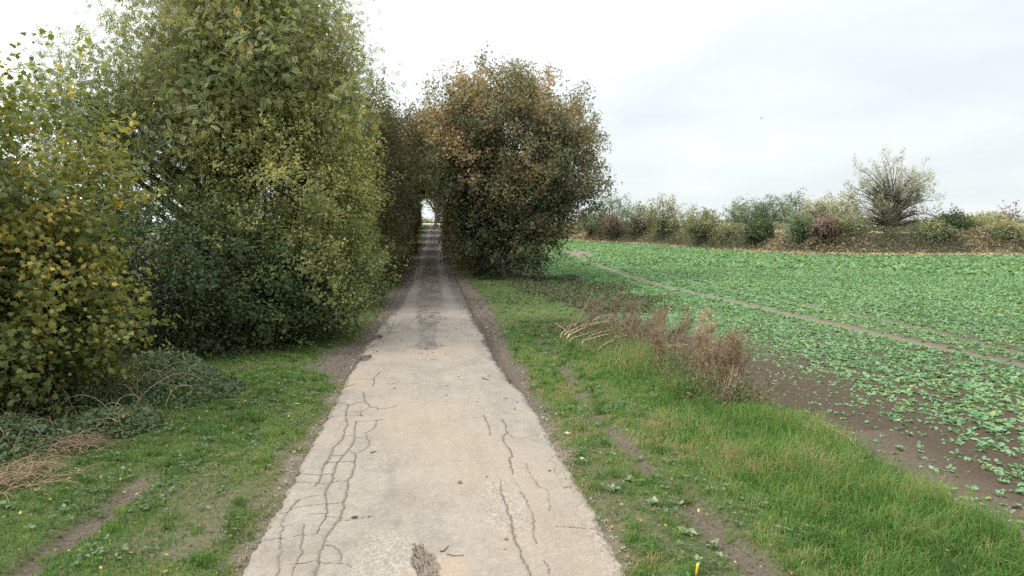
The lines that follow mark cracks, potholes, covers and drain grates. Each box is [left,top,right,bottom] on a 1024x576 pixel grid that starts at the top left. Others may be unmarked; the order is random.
crack [483,415,591,576]
pothole [409,543,442,576]
crack [260,392,397,576]
